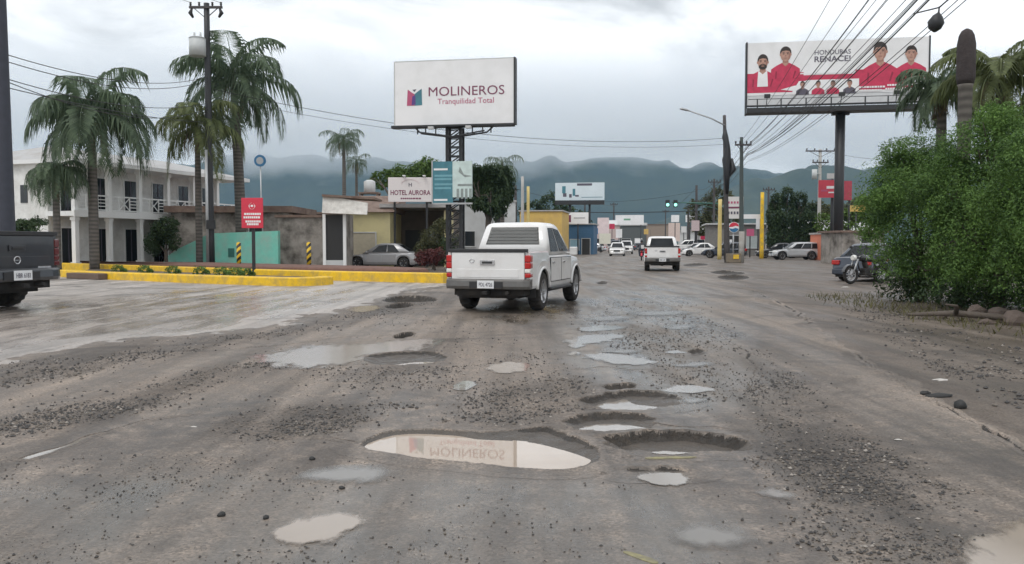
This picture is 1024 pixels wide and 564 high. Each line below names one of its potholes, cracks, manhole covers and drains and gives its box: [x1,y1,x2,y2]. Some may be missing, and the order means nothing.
pothole [553,388,708,414]
pothole [348,350,467,368]
pothole [328,422,635,480]
pothole [534,409,688,434]
pothole [592,460,725,483]
pothole [586,427,788,462]
pothole [373,295,446,303]
